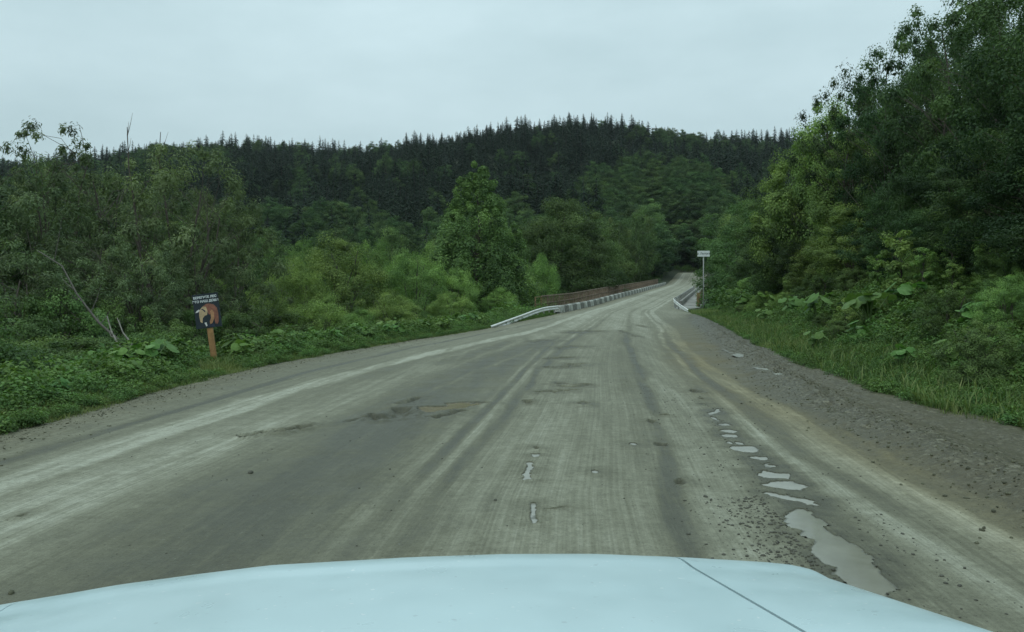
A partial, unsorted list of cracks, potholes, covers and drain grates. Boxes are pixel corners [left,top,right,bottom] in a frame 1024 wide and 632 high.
pothole [526,502,542,525]
pothole [236,422,317,437]
pothole [757,479,813,491]
pothole [414,401,491,412]
pothole [754,470,798,482]
pothole [727,445,767,454]
pothole [759,490,823,507]
pothole [422,409,471,419]
pothole [391,395,425,404]
pothole [366,406,418,421]
pothole [519,461,536,481]
pothole [779,507,902,598]
